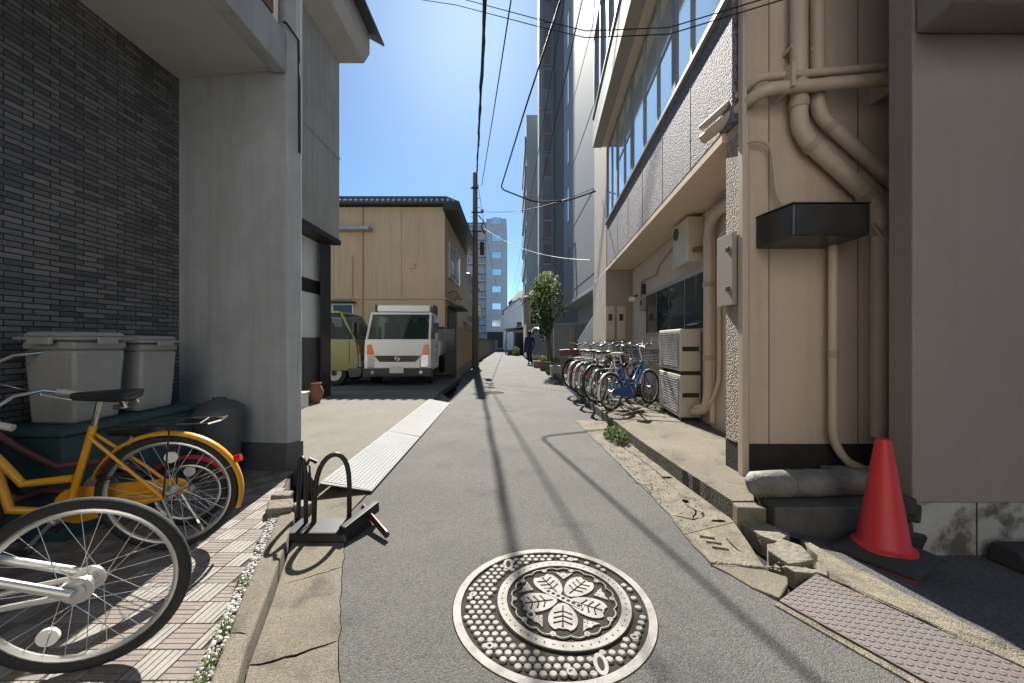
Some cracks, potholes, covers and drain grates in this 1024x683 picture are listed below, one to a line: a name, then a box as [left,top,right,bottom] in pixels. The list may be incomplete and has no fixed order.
manhole cover [453,549,658,683]
crack [248,641,337,669]
